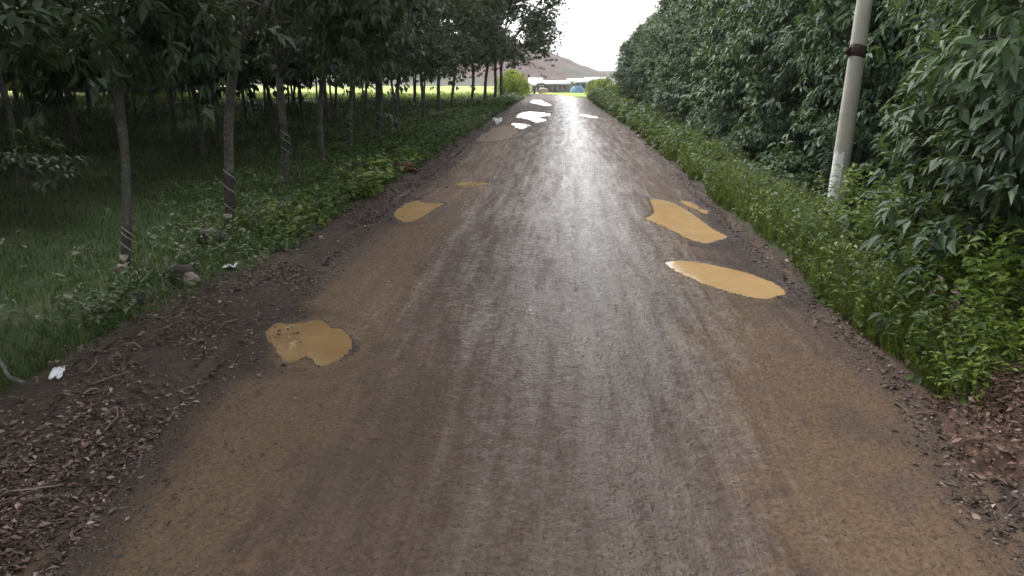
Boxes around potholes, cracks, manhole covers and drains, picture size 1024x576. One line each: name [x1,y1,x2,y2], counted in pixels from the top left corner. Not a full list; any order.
pothole [265,320,352,366]
pothole [664,259,786,299]
pothole [516,111,553,122]
pothole [394,200,444,222]
pothole [644,199,727,243]
pothole [477,127,519,141]
